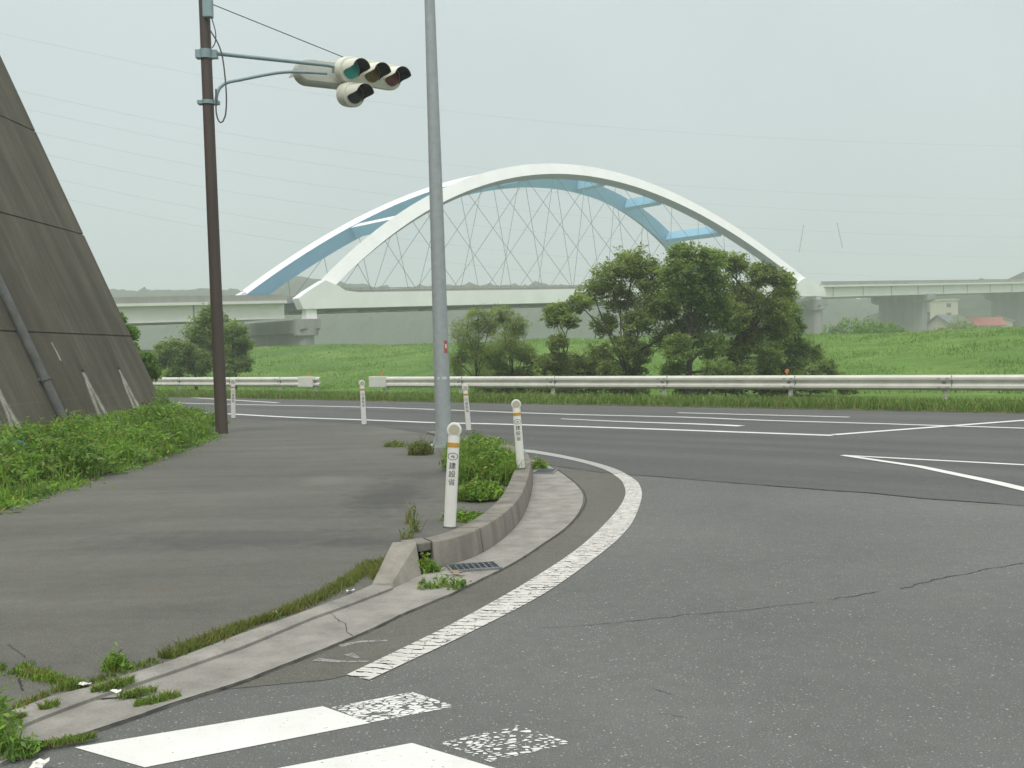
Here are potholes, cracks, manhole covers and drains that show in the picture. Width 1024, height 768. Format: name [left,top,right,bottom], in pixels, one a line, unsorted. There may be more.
drain grate [445,561,502,573]
